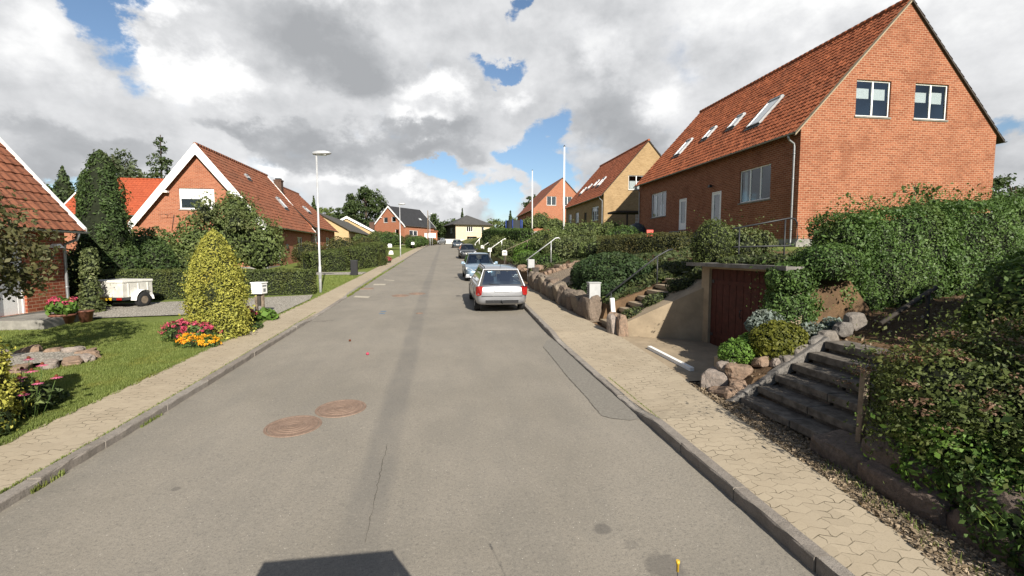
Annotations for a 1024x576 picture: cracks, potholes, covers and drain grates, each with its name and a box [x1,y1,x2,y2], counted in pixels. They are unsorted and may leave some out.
manhole cover [263,415,322,438]
manhole cover [315,399,367,418]
